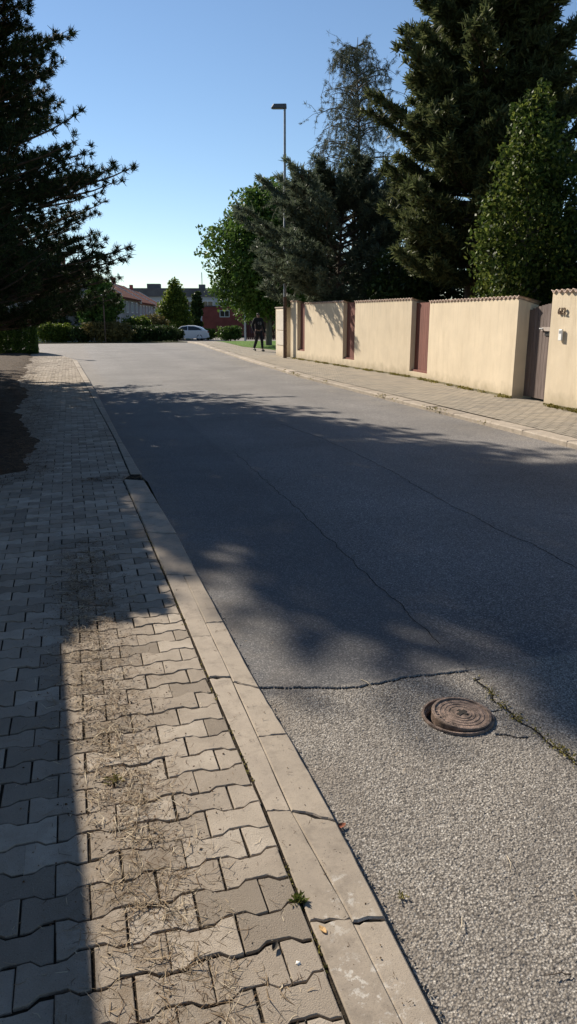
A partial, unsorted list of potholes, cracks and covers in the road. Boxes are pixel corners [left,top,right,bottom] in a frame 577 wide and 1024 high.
crack [235,452,577,765]
manhole cover [421,697,494,736]
crack [281,424,576,568]
